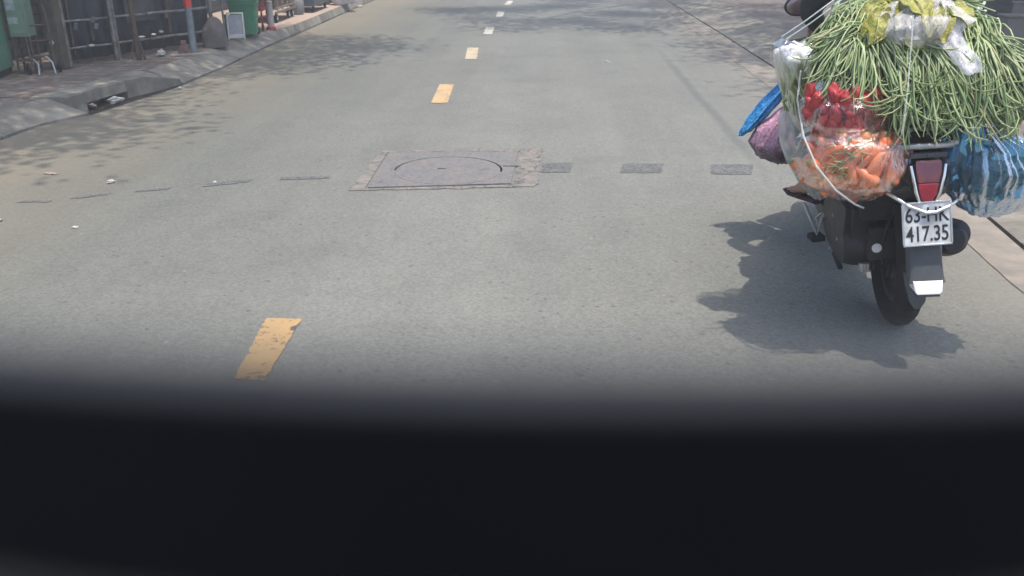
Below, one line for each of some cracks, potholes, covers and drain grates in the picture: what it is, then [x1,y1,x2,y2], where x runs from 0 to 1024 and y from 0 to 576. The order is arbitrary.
manhole cover [349,148,543,191]
